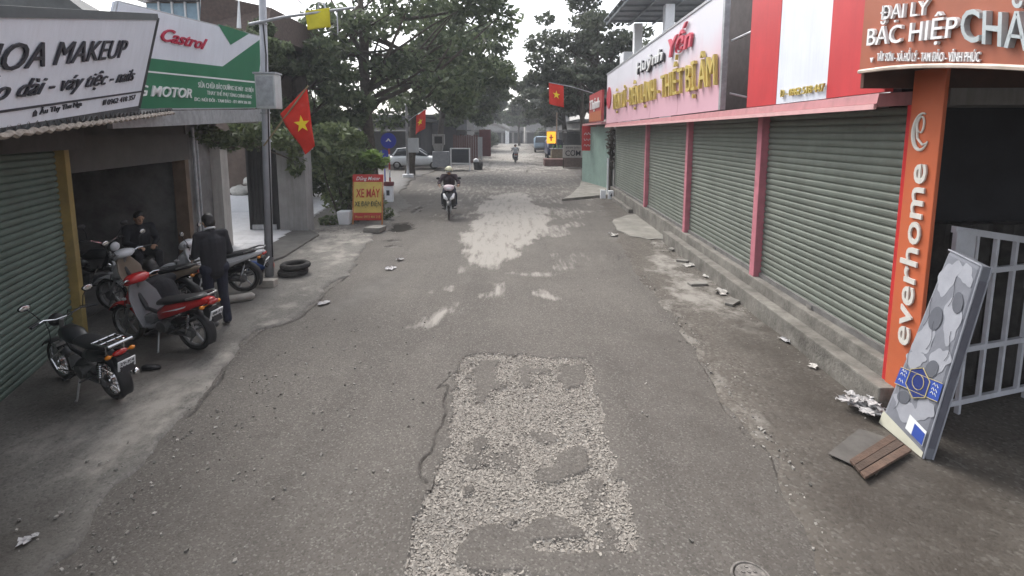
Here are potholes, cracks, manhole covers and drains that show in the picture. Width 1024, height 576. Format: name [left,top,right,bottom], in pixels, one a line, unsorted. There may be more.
crack [182,264,361,421]
pothole [392,349,661,576]
crack [409,360,456,490]
manhole cover [730,561,770,576]
